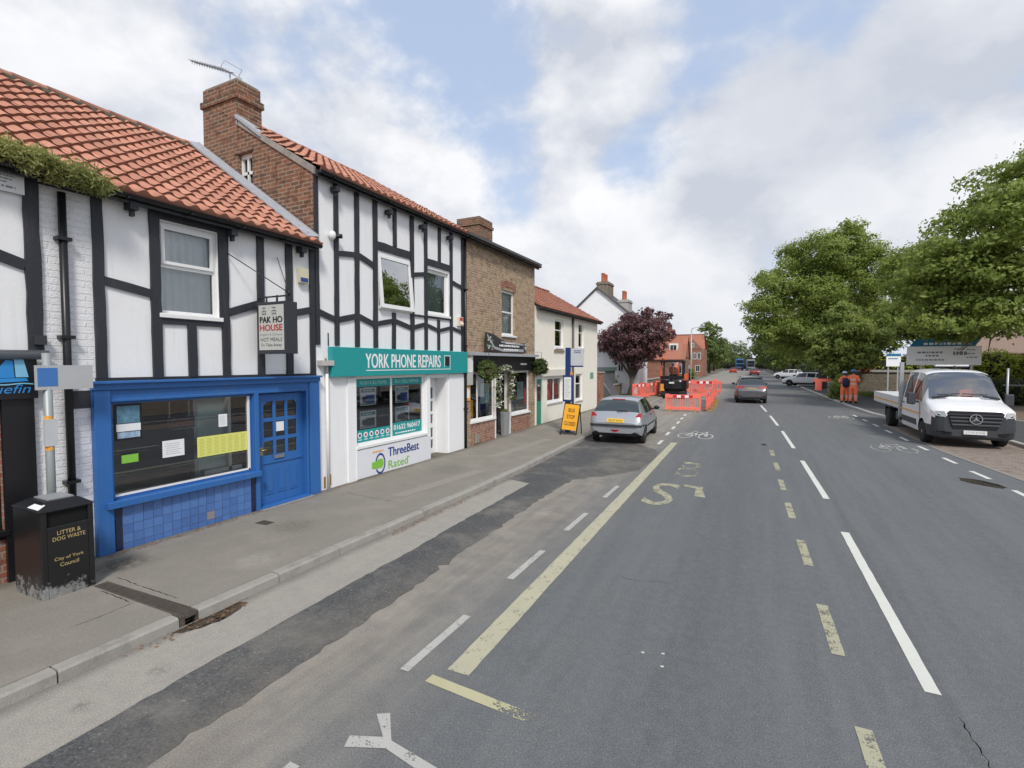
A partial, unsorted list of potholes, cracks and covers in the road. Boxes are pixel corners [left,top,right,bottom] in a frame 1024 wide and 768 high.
crack [81,578,175,624]
pothole [173,601,248,634]
